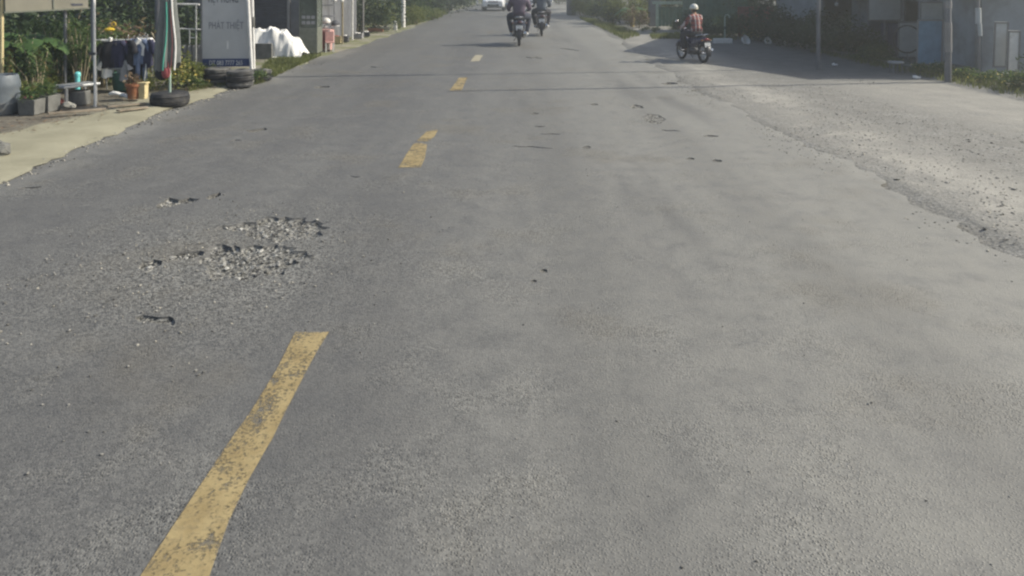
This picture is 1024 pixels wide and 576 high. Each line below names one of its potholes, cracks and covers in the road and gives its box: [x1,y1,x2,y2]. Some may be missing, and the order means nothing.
pothole [138,259,163,272]
pothole [156,198,199,209]
pothole [211,217,330,243]
pothole [643,114,666,124]
pothole [134,315,175,326]
pothole [167,251,204,261]
pothole [197,244,316,281]
